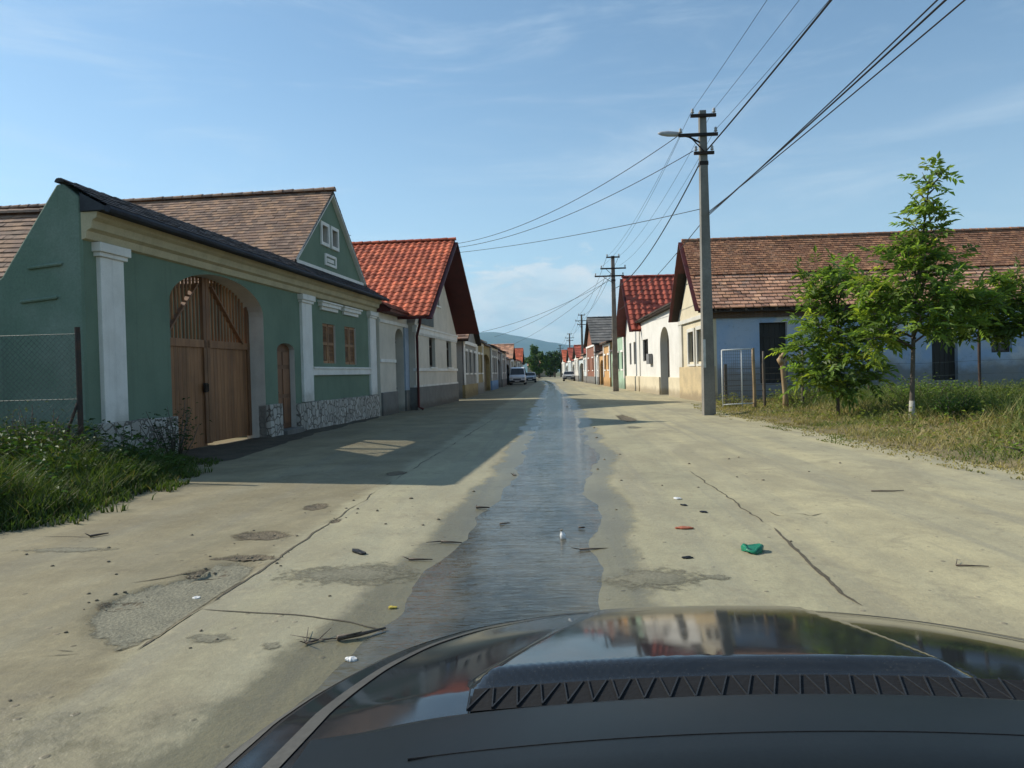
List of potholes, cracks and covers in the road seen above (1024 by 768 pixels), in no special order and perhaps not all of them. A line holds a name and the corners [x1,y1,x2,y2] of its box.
crack [691,472,861,605]
crack [207,609,405,634]
